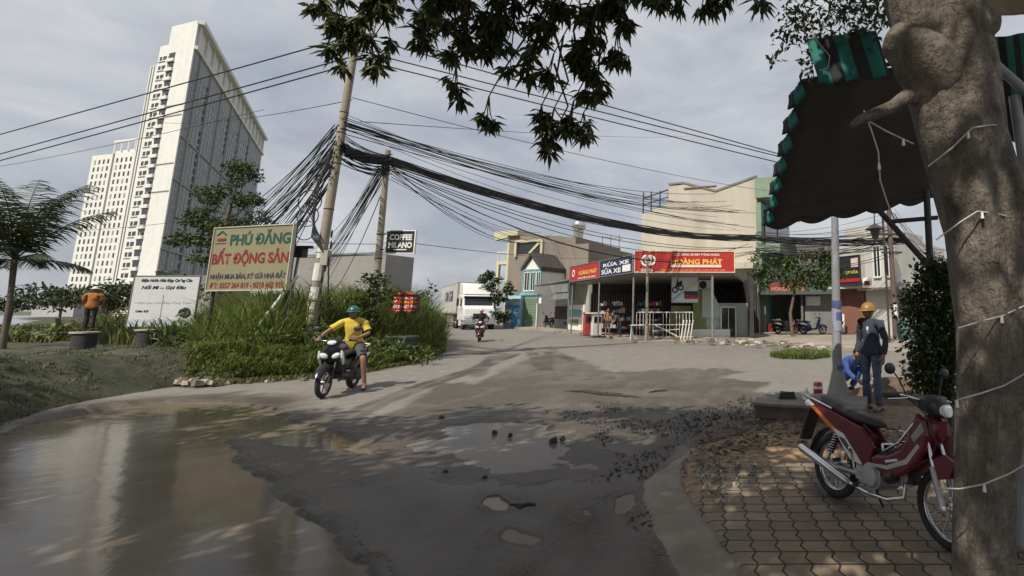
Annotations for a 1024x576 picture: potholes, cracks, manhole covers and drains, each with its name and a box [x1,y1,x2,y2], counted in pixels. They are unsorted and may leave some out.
pothole [0,399,396,576]
pothole [482,521,561,556]
pothole [367,415,645,487]
pothole [471,492,519,514]
pothole [602,486,647,519]
crack [570,389,668,397]
